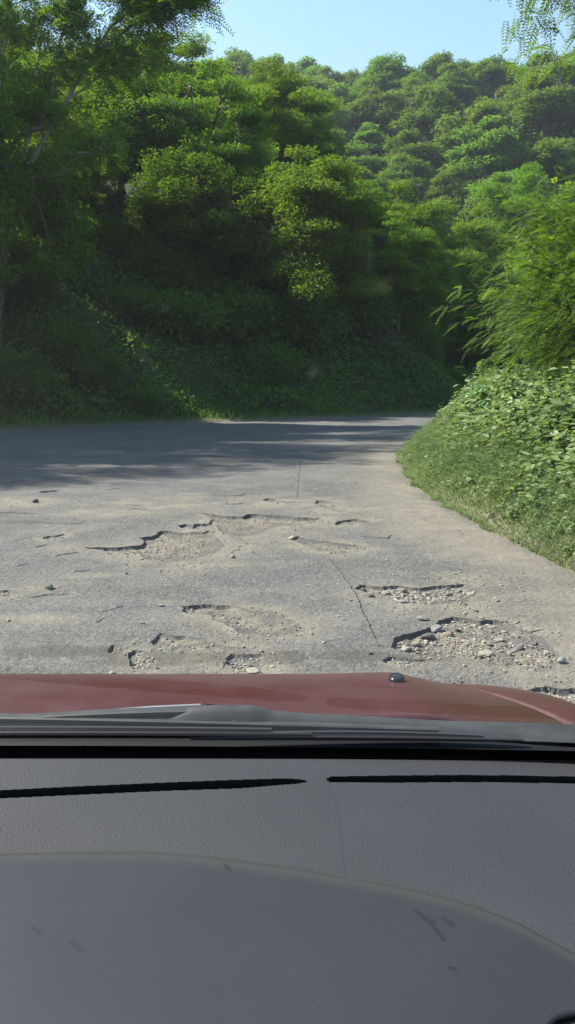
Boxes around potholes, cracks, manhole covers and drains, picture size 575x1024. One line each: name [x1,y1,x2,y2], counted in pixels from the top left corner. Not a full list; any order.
crack [277,460,302,503]
pothole [225,654,265,672]
pothole [87,531,225,562]
pothole [182,604,300,635]
pothole [201,513,324,537]
pothole [529,686,575,699]
crack [328,559,389,647]
pothole [391,616,560,672]
pothole [128,650,158,670]
pothole [295,536,367,554]
pothole [355,584,479,605]
pothole [382,657,428,665]
